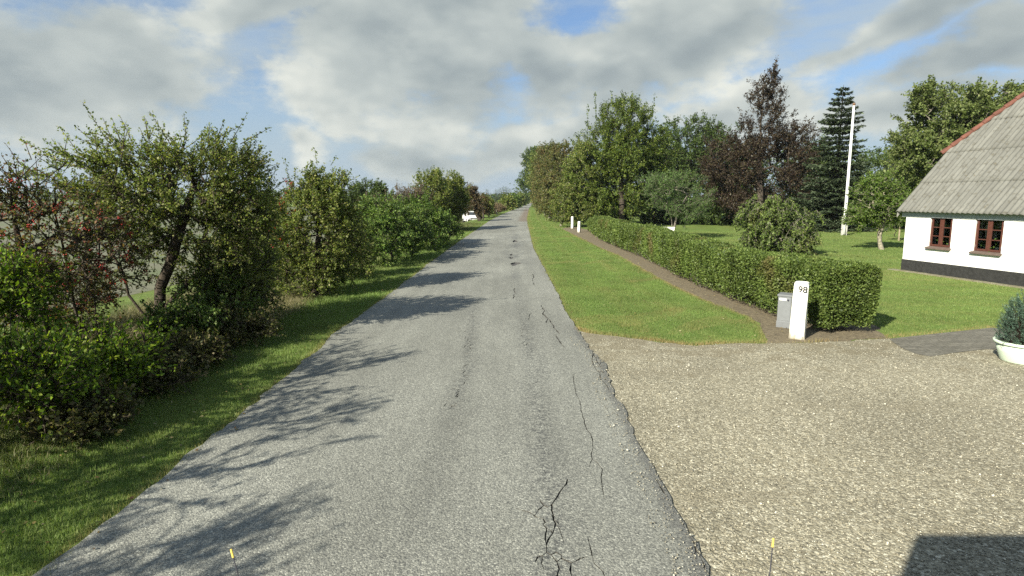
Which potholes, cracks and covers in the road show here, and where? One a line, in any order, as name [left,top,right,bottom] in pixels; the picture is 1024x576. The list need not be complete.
crack [443,302,478,409]
crack [513,274,562,346]
crack [517,479,605,576]
crack [573,374,605,499]
